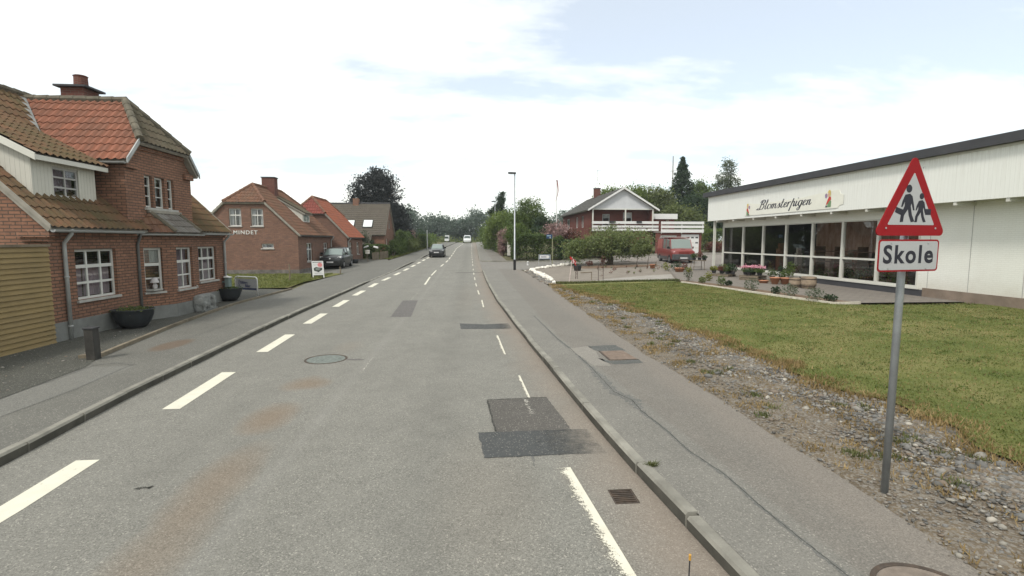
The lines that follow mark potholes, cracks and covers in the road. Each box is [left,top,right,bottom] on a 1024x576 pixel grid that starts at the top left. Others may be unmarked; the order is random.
drain grate [608,489,640,504]
manhole cover [304,354,348,364]
manhole cover [870,562,950,576]
manhole cover [599,350,639,360]
